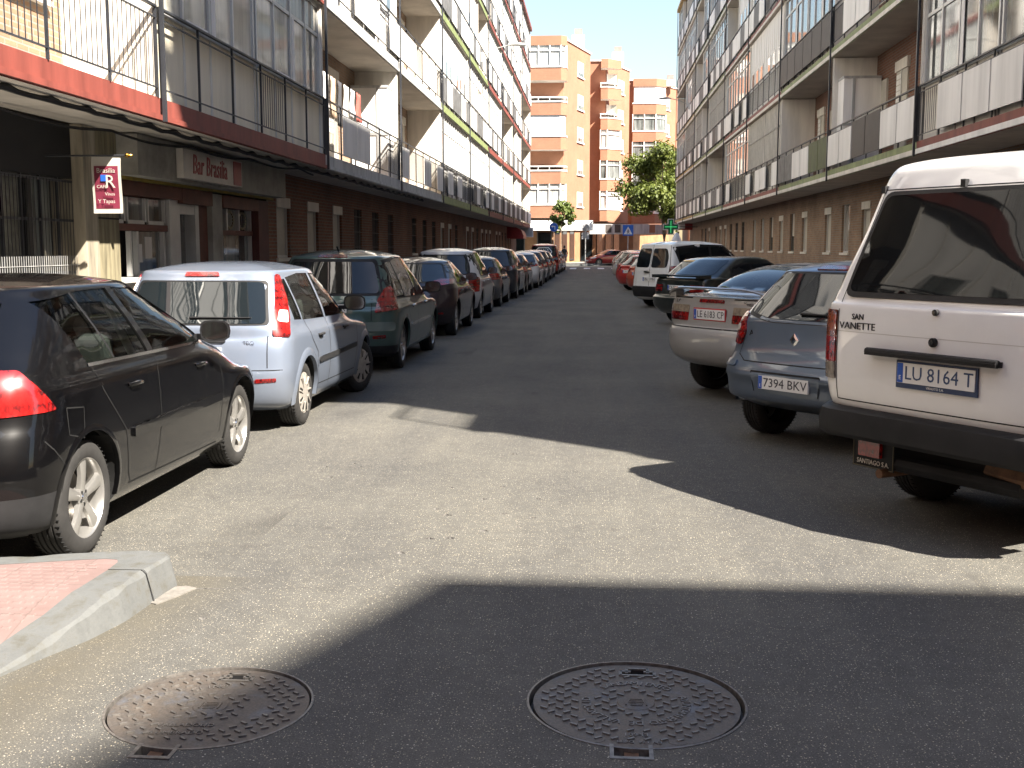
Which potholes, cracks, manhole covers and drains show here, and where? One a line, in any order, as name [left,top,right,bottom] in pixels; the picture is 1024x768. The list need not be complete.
manhole cover [102,667,314,761]
manhole cover [527,661,748,760]
